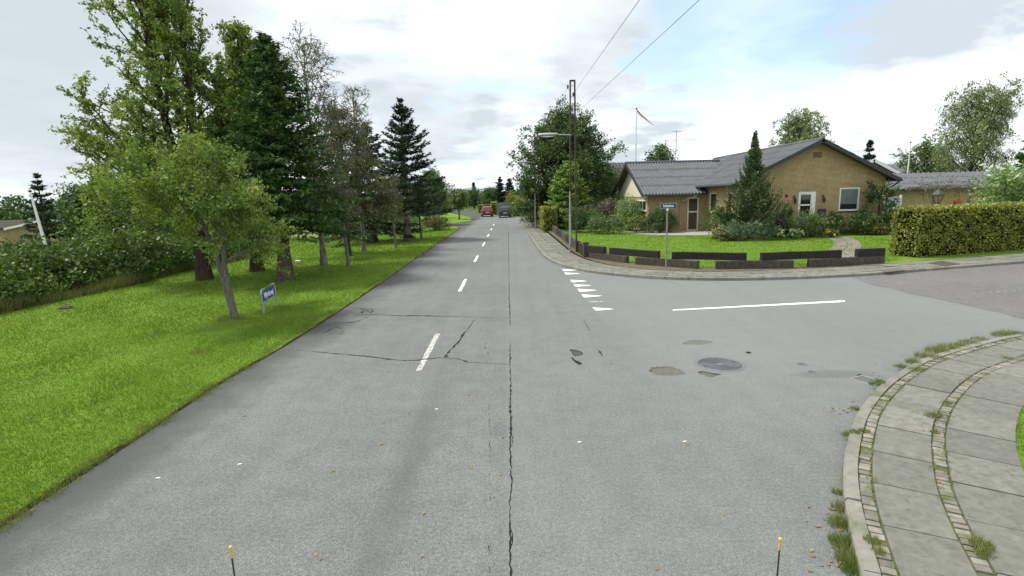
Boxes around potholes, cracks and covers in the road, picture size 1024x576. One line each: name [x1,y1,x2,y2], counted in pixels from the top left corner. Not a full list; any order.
drain grate [850,375,881,384]
manhole cover [694,357,747,372]
